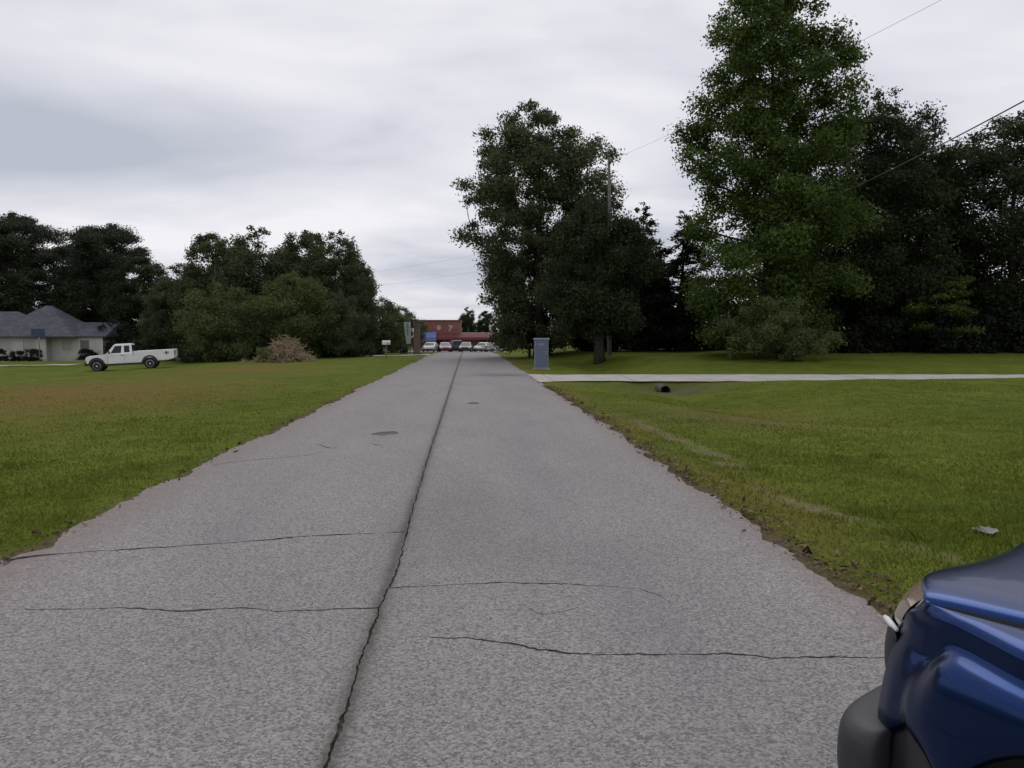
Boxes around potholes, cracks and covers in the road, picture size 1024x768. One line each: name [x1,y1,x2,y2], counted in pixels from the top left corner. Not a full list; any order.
crack [2,532,397,562]
crack [432,637,884,659]
